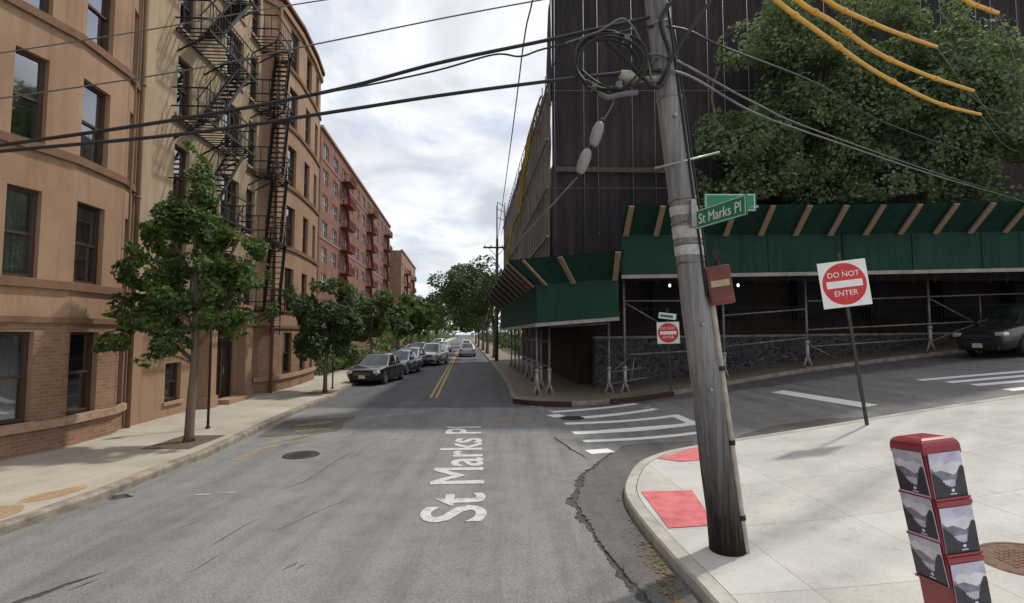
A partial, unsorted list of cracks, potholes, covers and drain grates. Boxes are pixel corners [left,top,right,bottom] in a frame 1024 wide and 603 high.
manhole cover [282,451,320,459]
manhole cover [979,542,1024,576]
